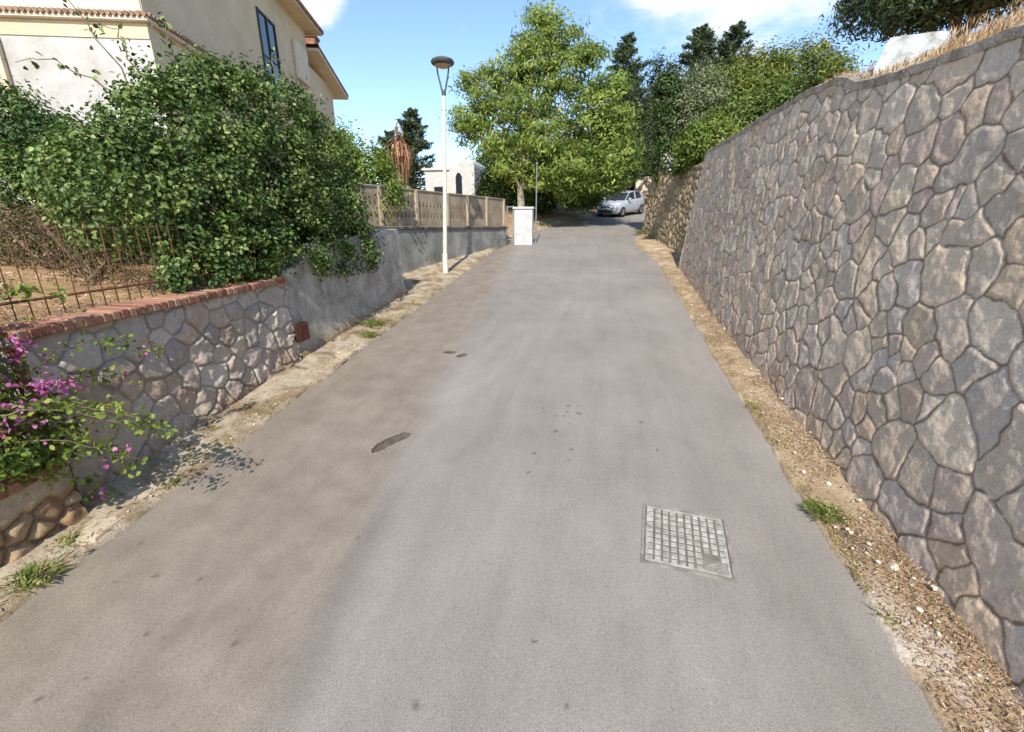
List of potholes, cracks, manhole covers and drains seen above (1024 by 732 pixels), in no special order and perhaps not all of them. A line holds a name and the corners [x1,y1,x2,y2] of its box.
manhole cover [640,503,738,583]
